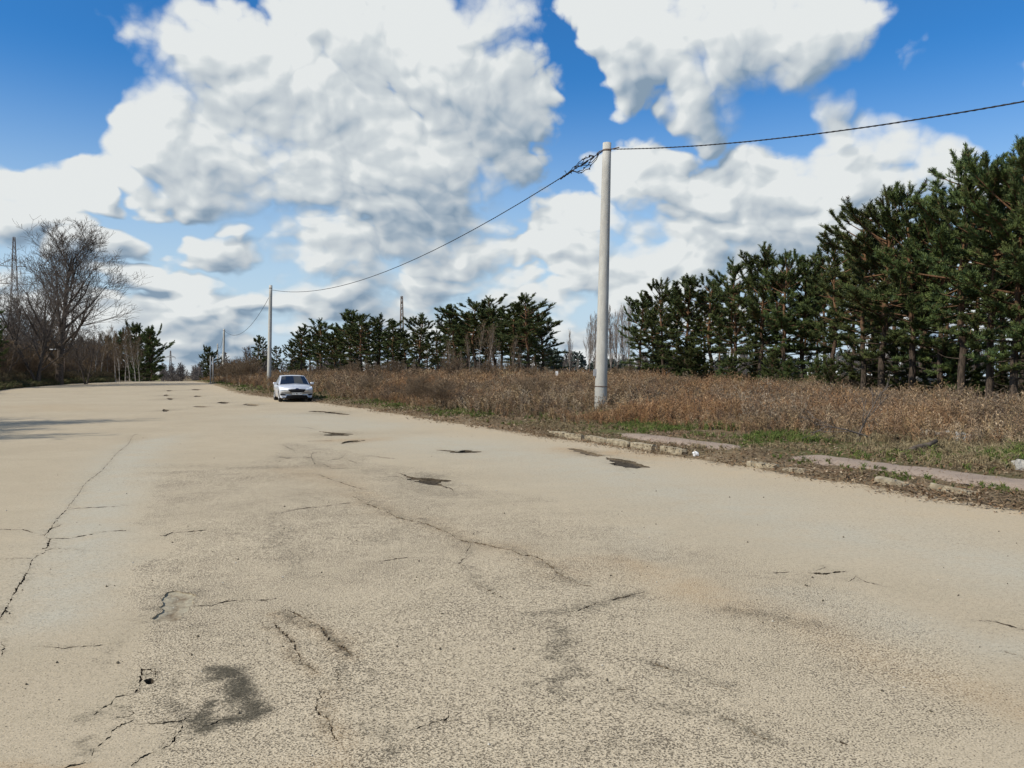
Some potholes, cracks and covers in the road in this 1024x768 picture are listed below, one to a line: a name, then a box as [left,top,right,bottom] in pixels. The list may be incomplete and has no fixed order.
crack [775,567,879,585]
crack [200,598,352,741]
crack [58,668,230,768]
pothole [606,458,650,469]
crack [283,447,640,613]
pothole [402,474,451,487]
crack [0,436,133,618]
pothole [567,448,603,457]
